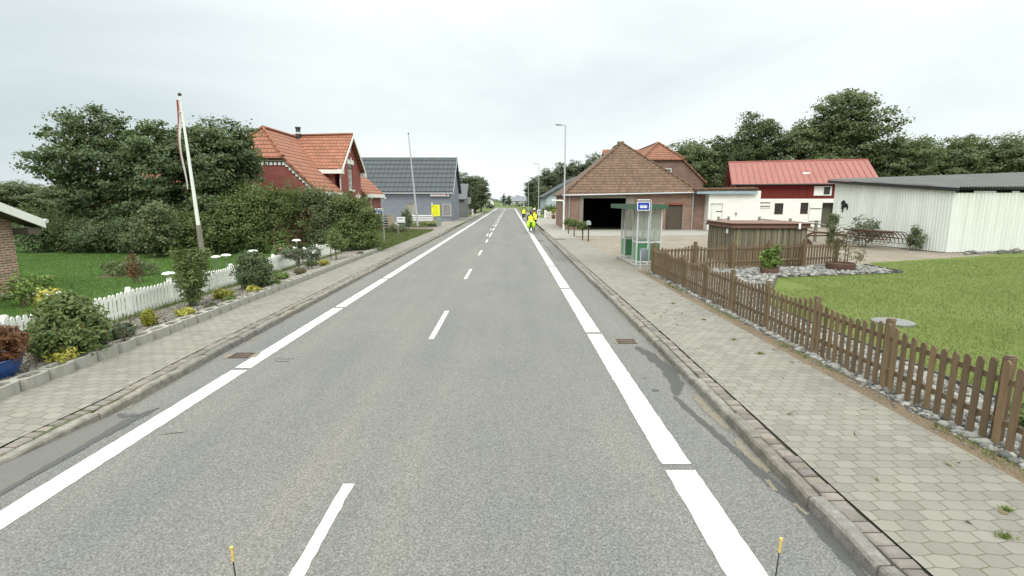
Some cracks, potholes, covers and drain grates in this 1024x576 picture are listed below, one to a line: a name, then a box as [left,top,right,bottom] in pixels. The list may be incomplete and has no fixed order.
manhole cover [871,317,916,327]
